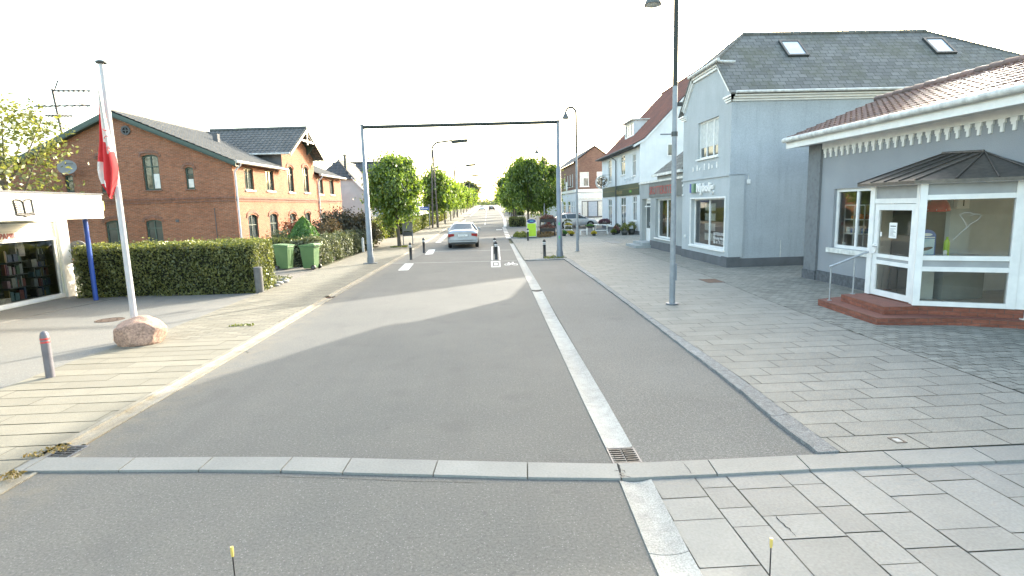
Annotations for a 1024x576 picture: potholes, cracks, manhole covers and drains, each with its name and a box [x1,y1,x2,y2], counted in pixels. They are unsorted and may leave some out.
drain grate [606,447,642,465]
drain grate [45,445,90,458]
